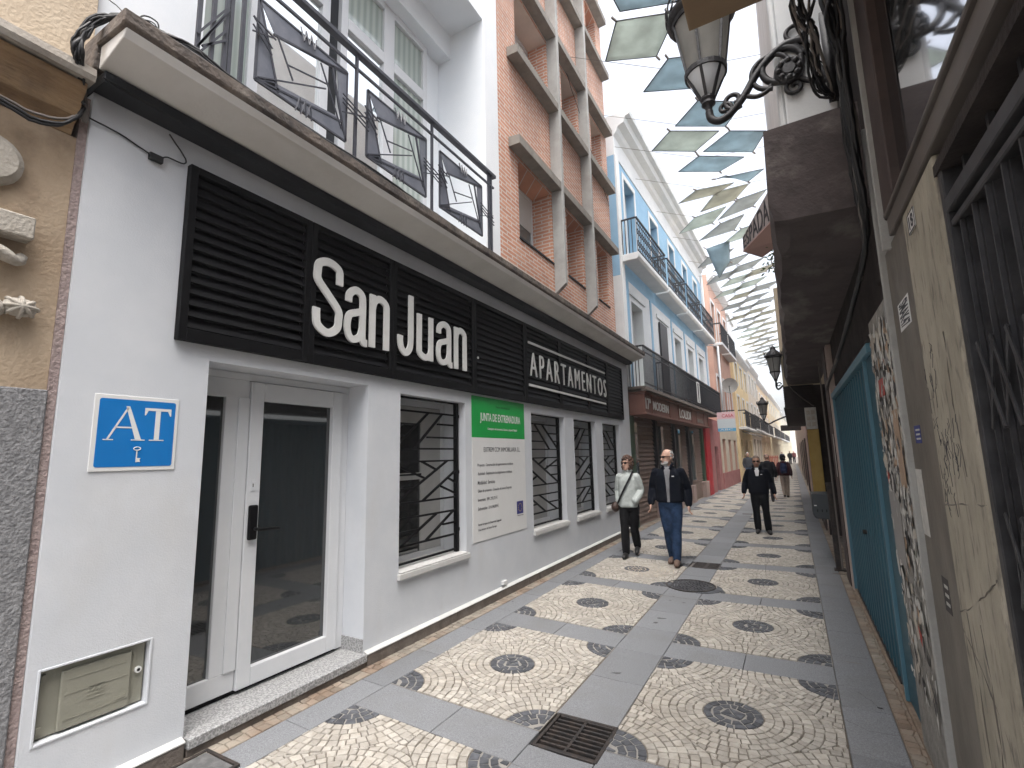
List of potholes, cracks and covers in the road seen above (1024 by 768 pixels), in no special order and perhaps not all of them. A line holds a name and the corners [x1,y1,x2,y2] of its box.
drain grate [692,562,722,570]
drain grate [531,712,619,765]
manhole cover [666,579,716,593]
